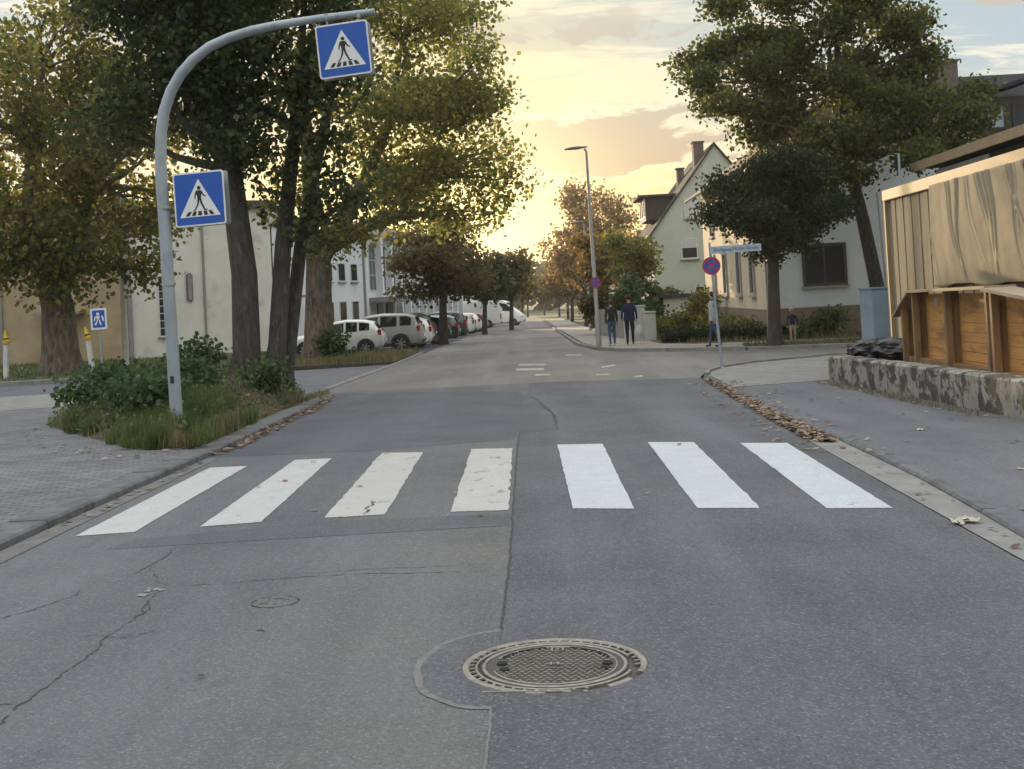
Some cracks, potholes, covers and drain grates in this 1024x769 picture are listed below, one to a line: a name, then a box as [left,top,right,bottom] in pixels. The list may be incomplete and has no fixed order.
manhole cover [462,638,648,693]
crack [532,397,558,430]
manhole cover [251,596,300,608]
crack [0,547,173,724]
